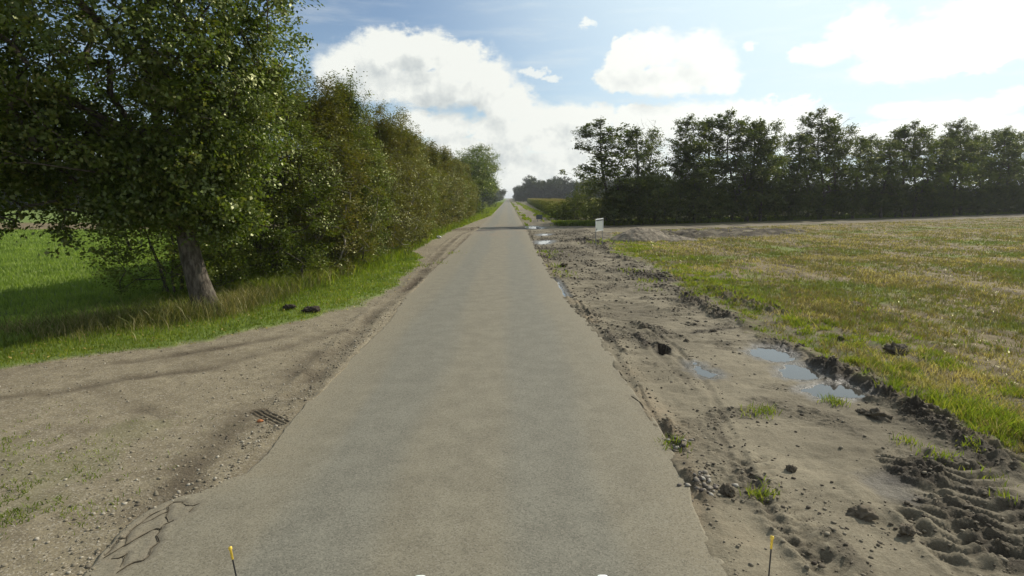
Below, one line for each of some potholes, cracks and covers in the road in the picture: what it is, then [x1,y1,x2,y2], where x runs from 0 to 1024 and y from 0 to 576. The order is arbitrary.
crack [104,502,200,573]
